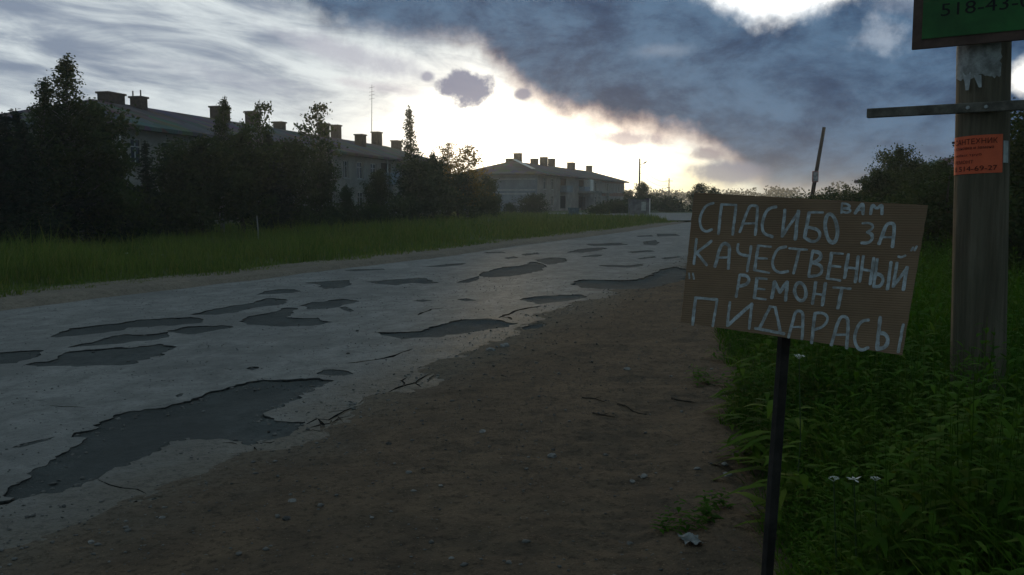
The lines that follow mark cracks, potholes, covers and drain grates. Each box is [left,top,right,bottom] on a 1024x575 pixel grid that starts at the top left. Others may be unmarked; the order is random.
pothole [0,350,44,364]
pothole [300,299,359,309]
pothole [479,262,546,277]
pothole [571,267,686,289]
pothole [51,317,204,337]
pothole [0,378,333,505]
pothole [377,319,517,339]
pothole [168,325,233,334]
crack [302,374,434,432]
pothole [240,308,329,327]
crack [498,306,539,320]
pothole [520,295,587,304]
